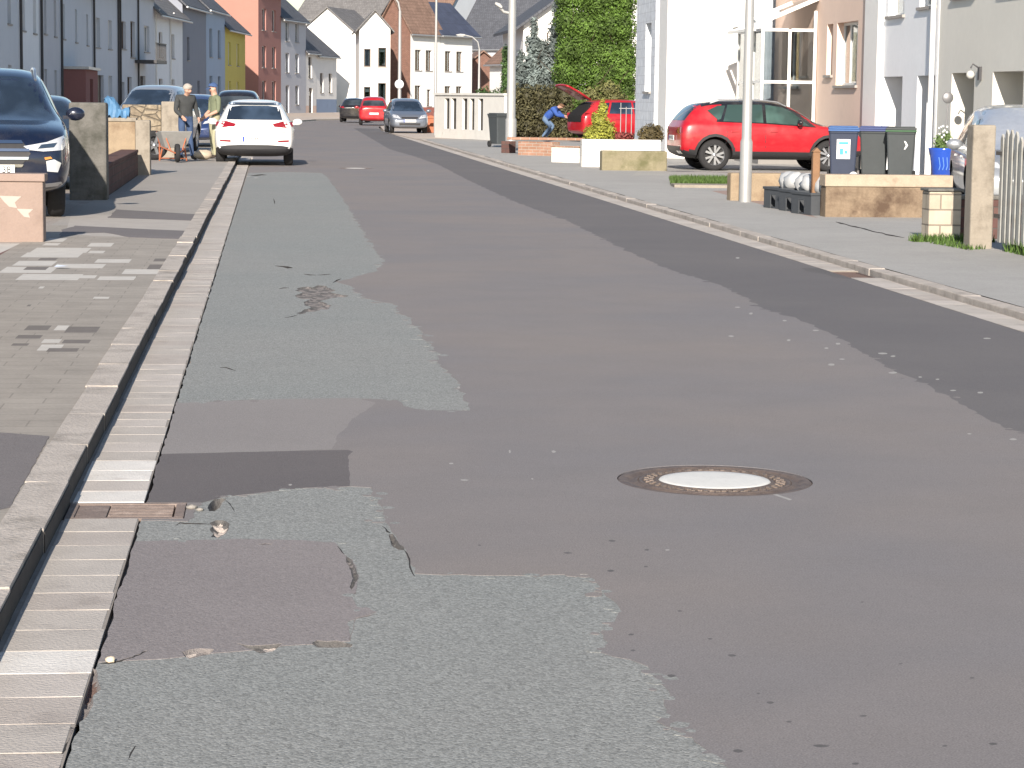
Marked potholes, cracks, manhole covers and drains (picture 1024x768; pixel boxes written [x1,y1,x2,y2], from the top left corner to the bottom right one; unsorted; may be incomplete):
crack [101,651,146,664]
pothole [208,498,226,511]
drain grate [63,503,187,524]
manhole cover [618,466,812,496]
pothole [295,285,348,314]
pothole [210,520,229,538]
